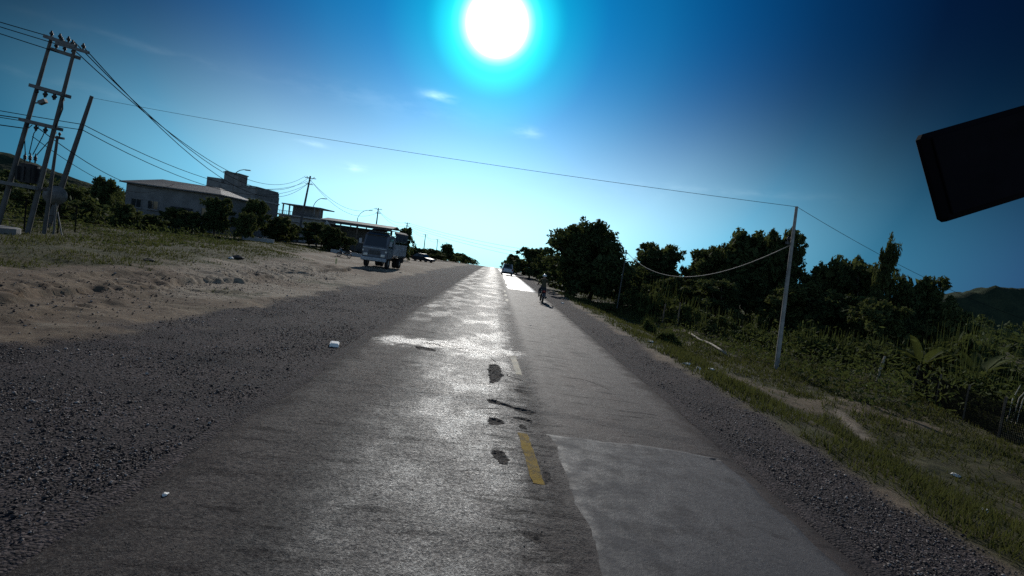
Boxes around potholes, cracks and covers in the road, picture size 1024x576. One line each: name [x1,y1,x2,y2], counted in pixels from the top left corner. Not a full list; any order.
pothole [484,364,508,385]
pothole [504,415,538,425]
pothole [482,415,512,428]
pothole [485,448,517,468]
